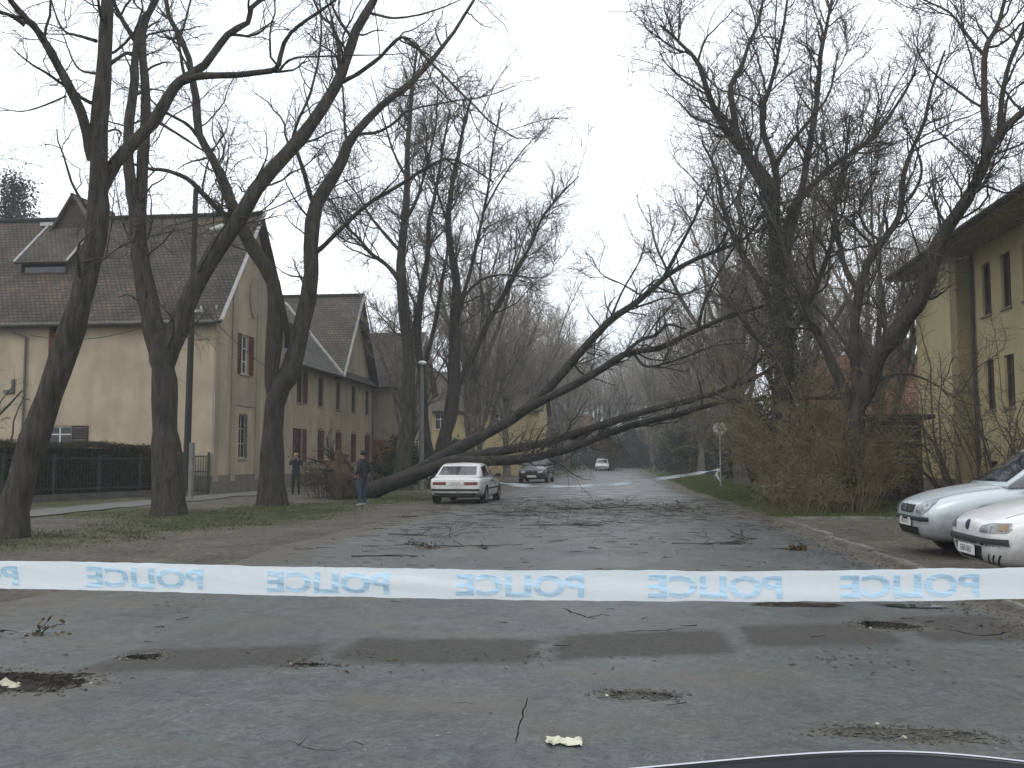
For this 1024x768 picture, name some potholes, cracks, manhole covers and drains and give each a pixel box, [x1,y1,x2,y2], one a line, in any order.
pothole [841,618,940,632]
pothole [788,722,1023,745]
pothole [116,650,176,661]
pothole [585,687,692,702]
crack [516,698,528,741]
pothole [0,666,134,697]
crack [566,609,682,633]
